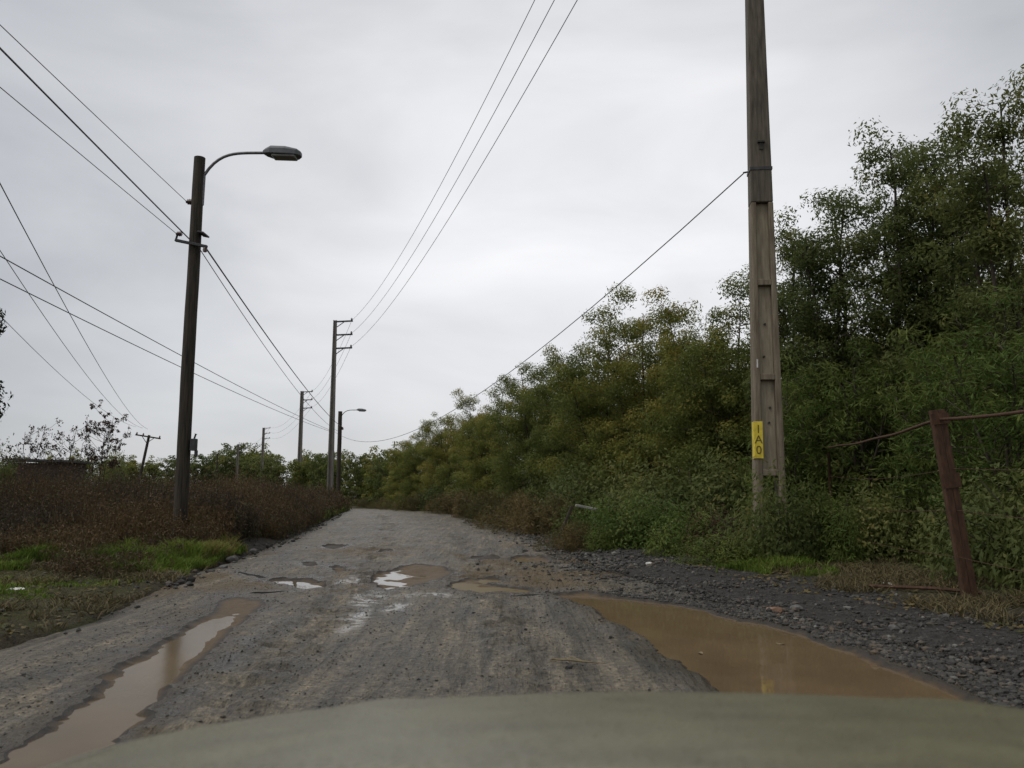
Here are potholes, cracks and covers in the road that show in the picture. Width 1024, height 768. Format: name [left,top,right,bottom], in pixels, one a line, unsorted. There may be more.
pothole [553,591,984,703]
pothole [0,597,266,768]
pothole [446,576,535,593]
pothole [268,577,327,589]
pothole [369,564,455,590]
